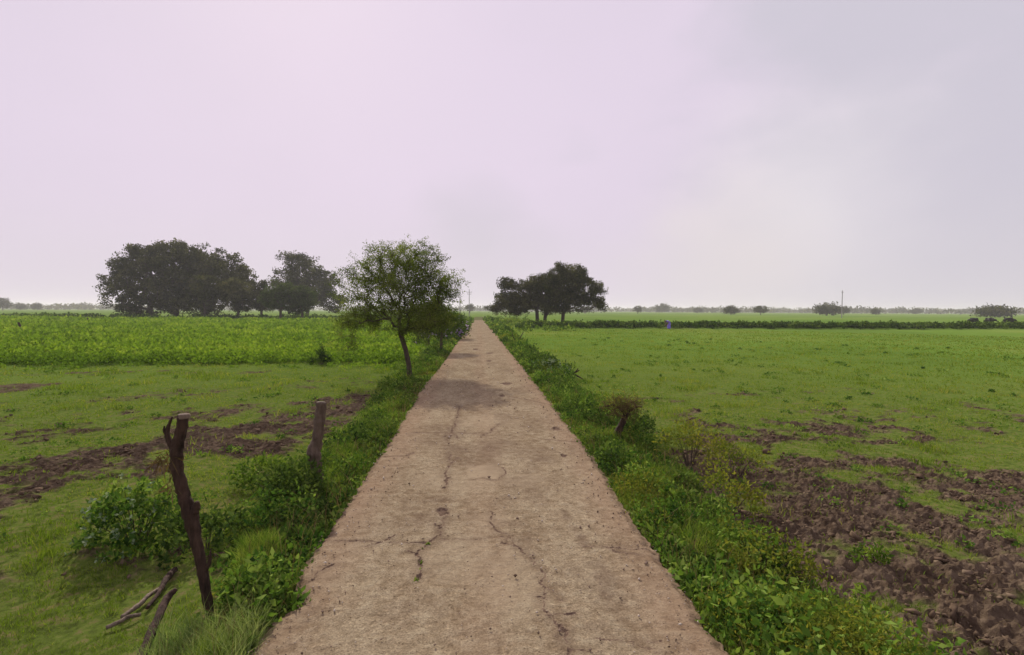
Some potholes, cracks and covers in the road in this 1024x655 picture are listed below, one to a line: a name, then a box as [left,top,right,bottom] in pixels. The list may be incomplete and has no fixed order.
crack [489,511,662,655]
crack [407,514,448,581]
crack [415,406,507,489]
